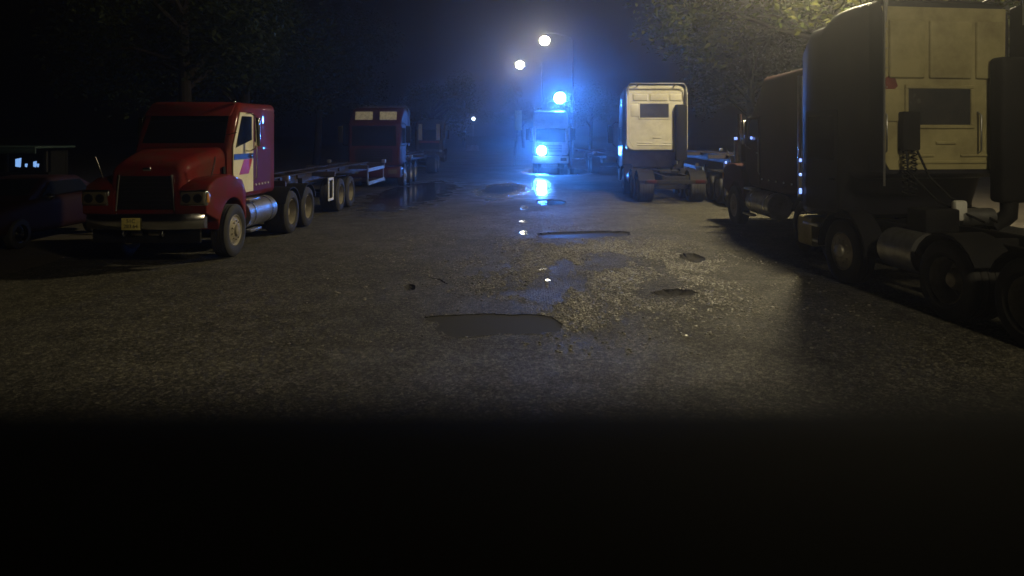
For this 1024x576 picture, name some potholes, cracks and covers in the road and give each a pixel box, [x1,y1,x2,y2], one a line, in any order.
pothole [678,252,707,263]
pothole [420,312,568,338]
pothole [534,230,633,239]
pothole [648,288,701,297]
